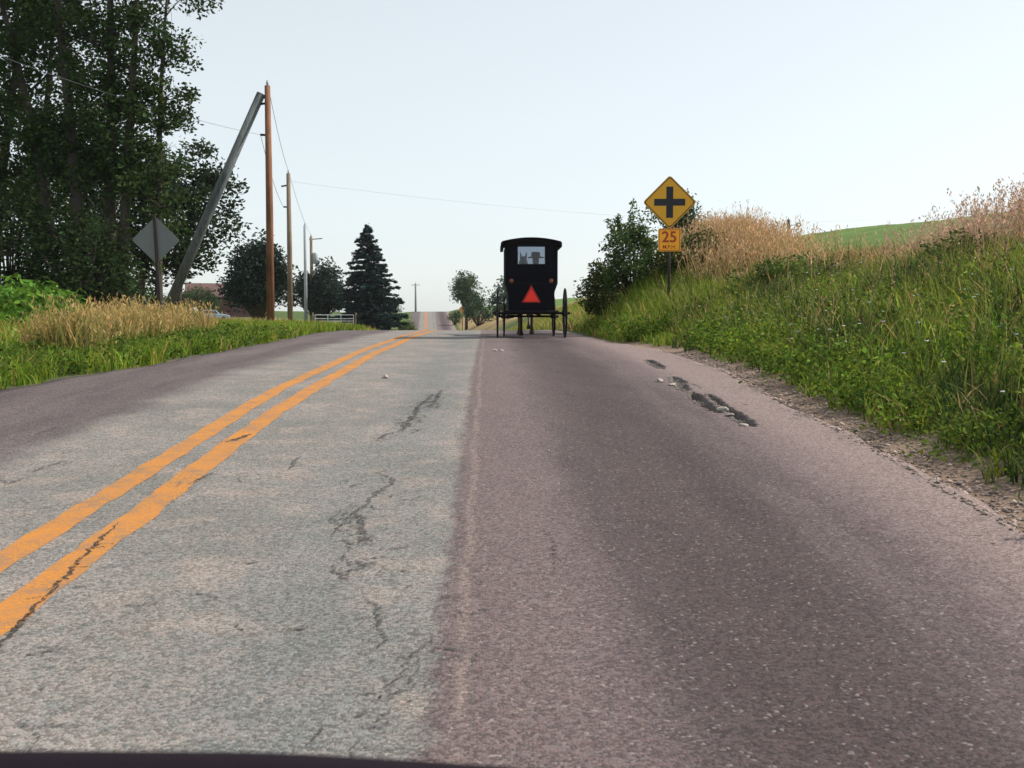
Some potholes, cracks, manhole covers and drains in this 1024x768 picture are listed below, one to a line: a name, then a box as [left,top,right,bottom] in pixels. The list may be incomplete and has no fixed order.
pothole [644,359,667,369]
crack [325,388,484,757]
pothole [667,376,693,391]
pothole [705,394,759,427]
pothole [687,391,725,413]
